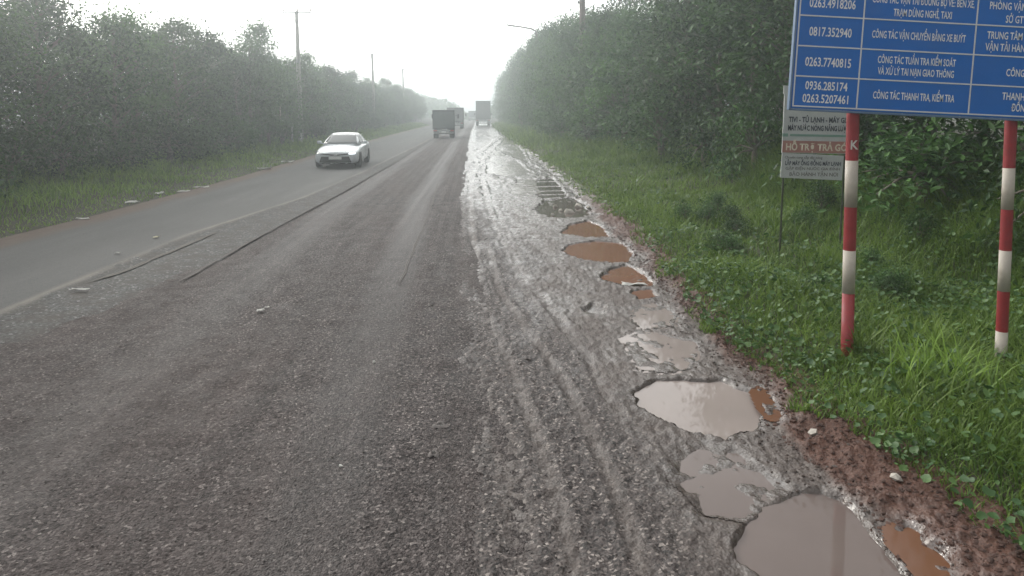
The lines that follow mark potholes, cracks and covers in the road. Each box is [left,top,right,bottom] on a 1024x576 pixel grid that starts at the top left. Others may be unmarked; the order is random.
crack [399,183,438,284]
pothole [618,332,701,375]
pothole [628,303,680,332]
pothole [881,519,964,576]
pothole [665,440,794,525]
pothole [600,264,654,287]
pothole [535,197,590,218]
pothole [633,378,767,440]
pothole [561,221,609,237]
pothole [733,484,904,576]
pothole [562,239,633,263]
pothole [631,290,659,299]
